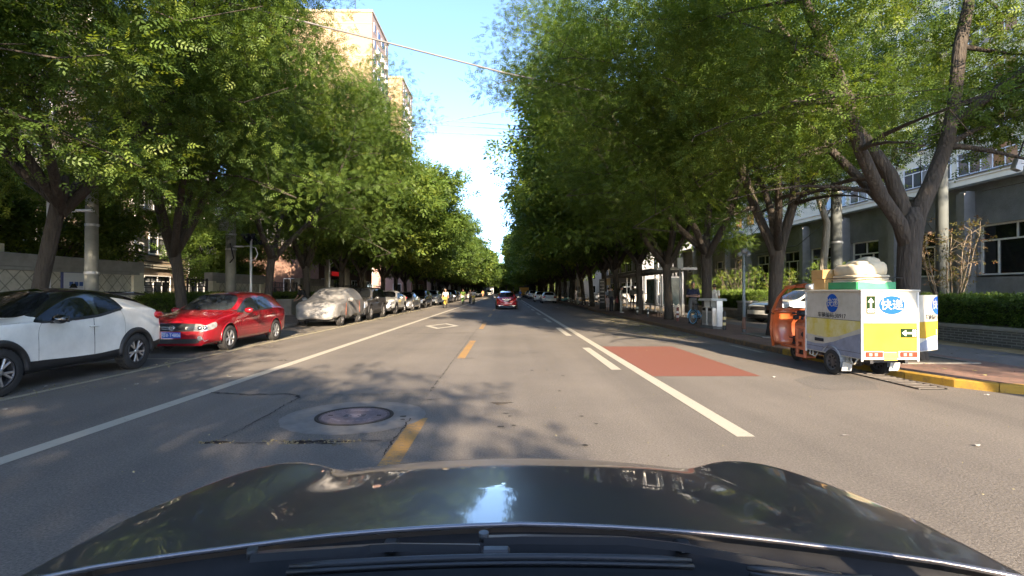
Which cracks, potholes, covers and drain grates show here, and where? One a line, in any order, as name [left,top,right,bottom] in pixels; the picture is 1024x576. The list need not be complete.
drain grate [844,368,949,389]
crack [211,392,300,443]
